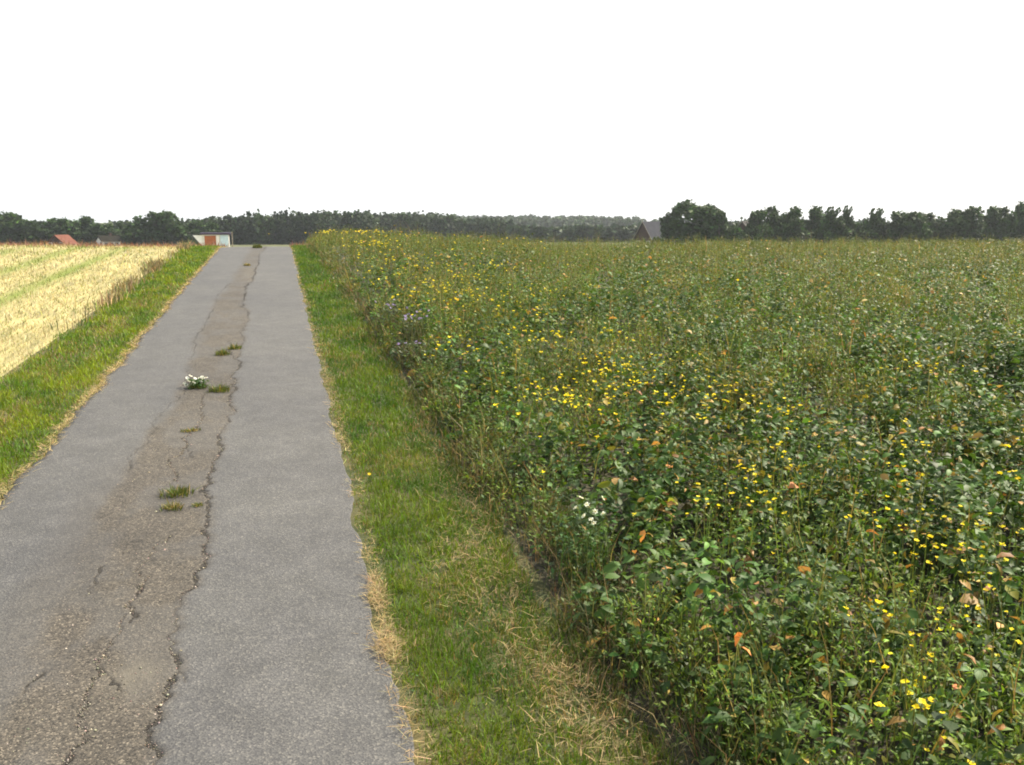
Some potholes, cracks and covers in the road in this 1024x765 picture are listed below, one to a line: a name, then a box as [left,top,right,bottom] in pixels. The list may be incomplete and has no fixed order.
crack [63,540,167,765]
crack [128,248,265,762]
